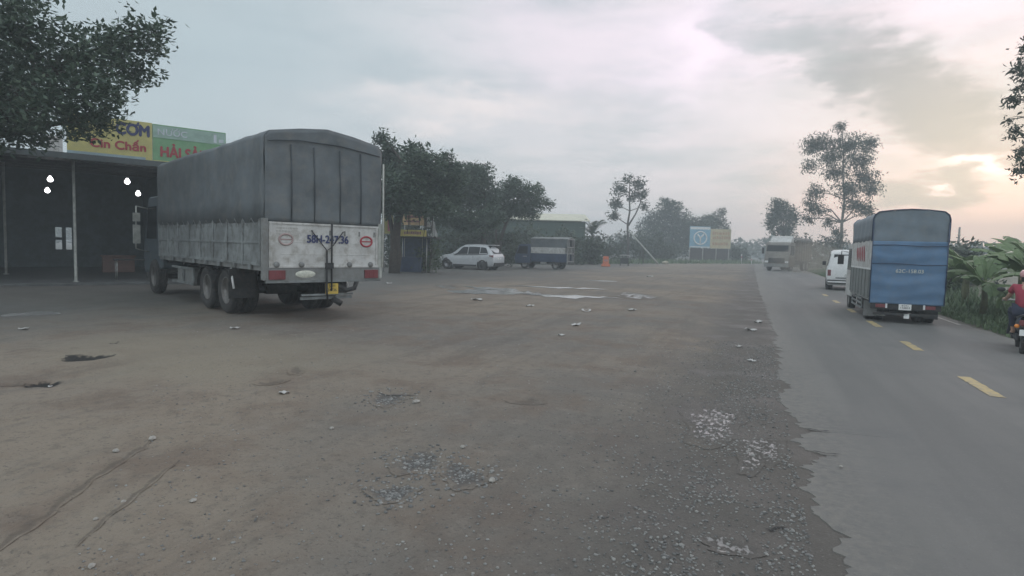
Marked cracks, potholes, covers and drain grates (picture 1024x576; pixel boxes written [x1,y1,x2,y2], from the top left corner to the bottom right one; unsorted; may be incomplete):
pothole [362,482,424,504]
pothole [367,391,411,408]
pothole [385,447,446,476]
pothole [61,354,116,362]
pothole [440,458,490,491]
